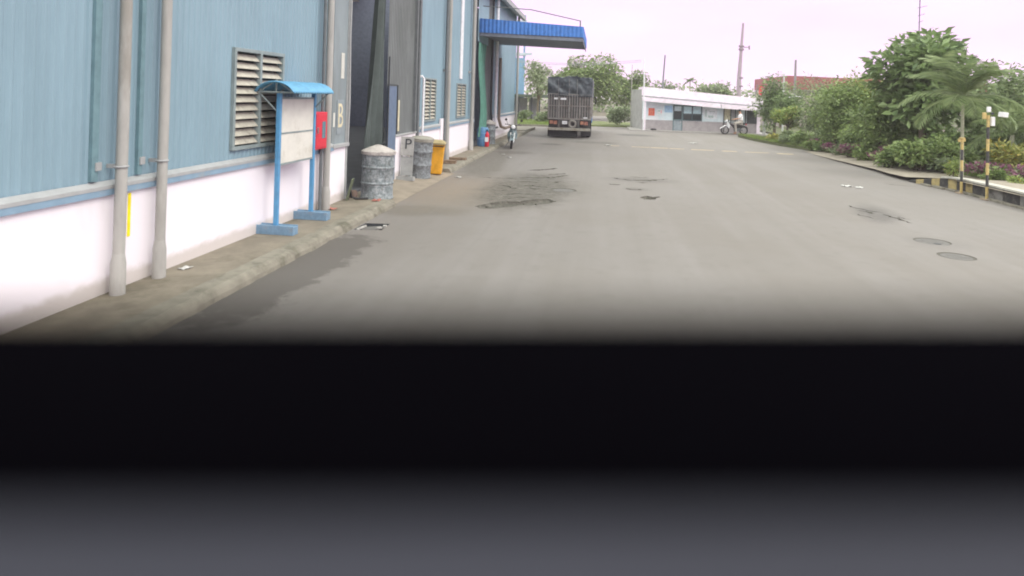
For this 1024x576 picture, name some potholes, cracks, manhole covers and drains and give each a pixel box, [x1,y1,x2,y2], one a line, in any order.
manhole cover [936,252,977,261]
pothole [475,199,556,209]
